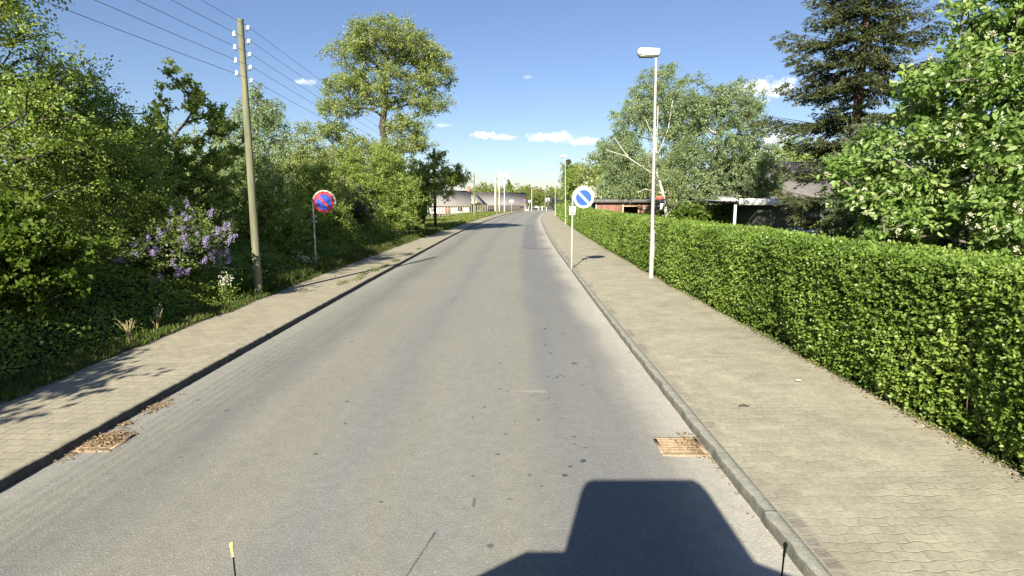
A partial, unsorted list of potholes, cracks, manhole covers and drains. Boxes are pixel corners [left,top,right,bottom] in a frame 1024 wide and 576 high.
drain grate [72,433,138,453]
drain grate [652,437,709,457]
